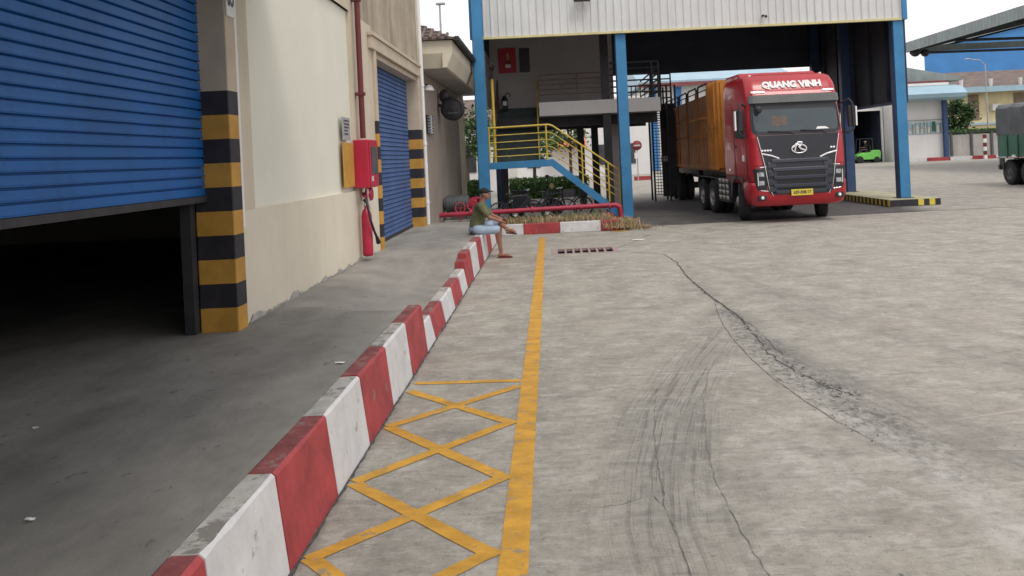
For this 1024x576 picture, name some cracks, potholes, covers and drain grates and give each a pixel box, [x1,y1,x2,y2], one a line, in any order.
crack [703,375,770,576]
drain grate [552,246,620,255]
crack [714,300,902,455]
